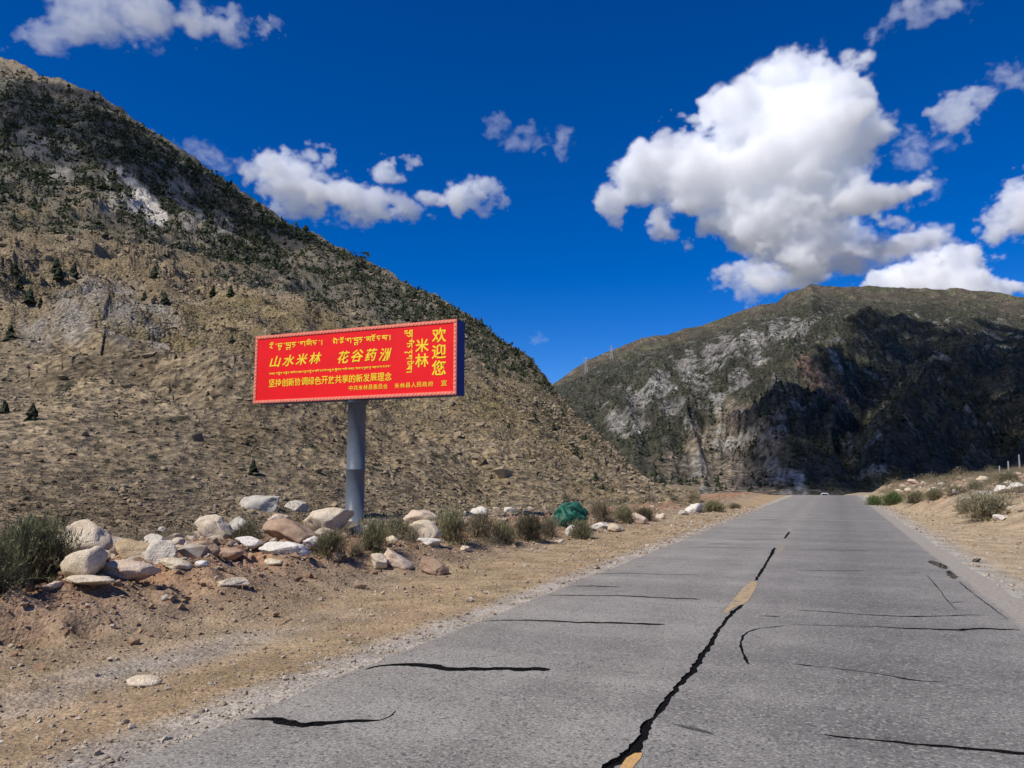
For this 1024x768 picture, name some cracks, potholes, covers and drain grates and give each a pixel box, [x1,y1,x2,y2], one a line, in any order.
crack [491,573,1015,768]
